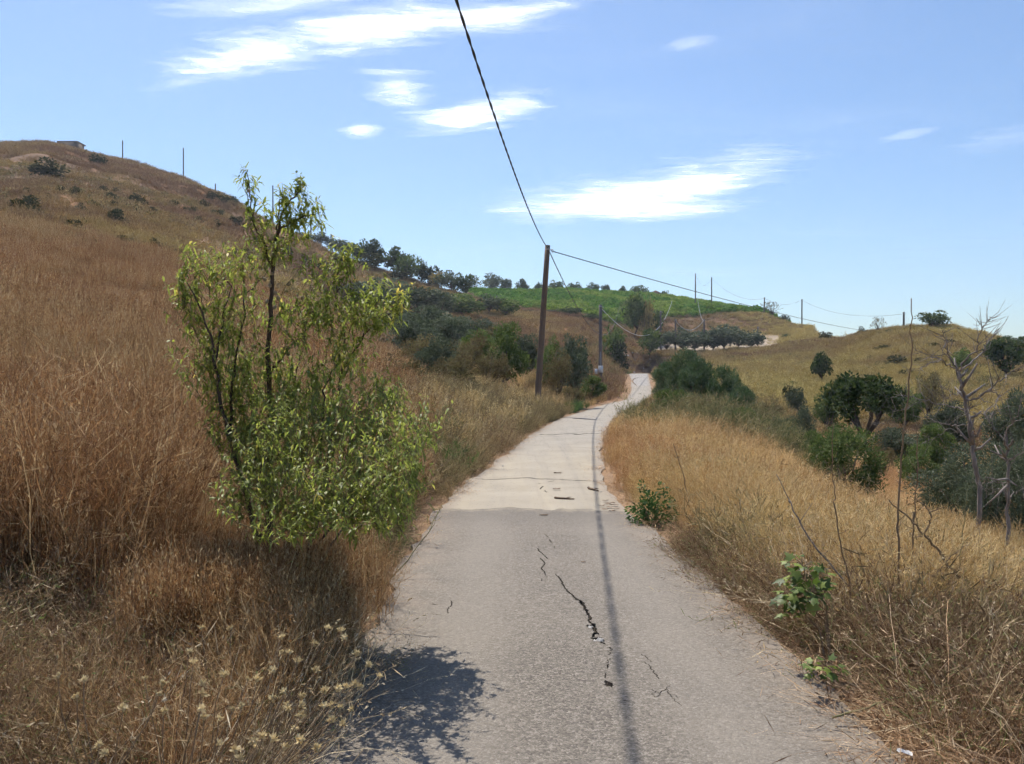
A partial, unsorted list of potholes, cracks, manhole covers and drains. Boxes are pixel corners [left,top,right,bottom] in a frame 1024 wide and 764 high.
crack [537,534,613,678]
crack [640,653,682,706]
